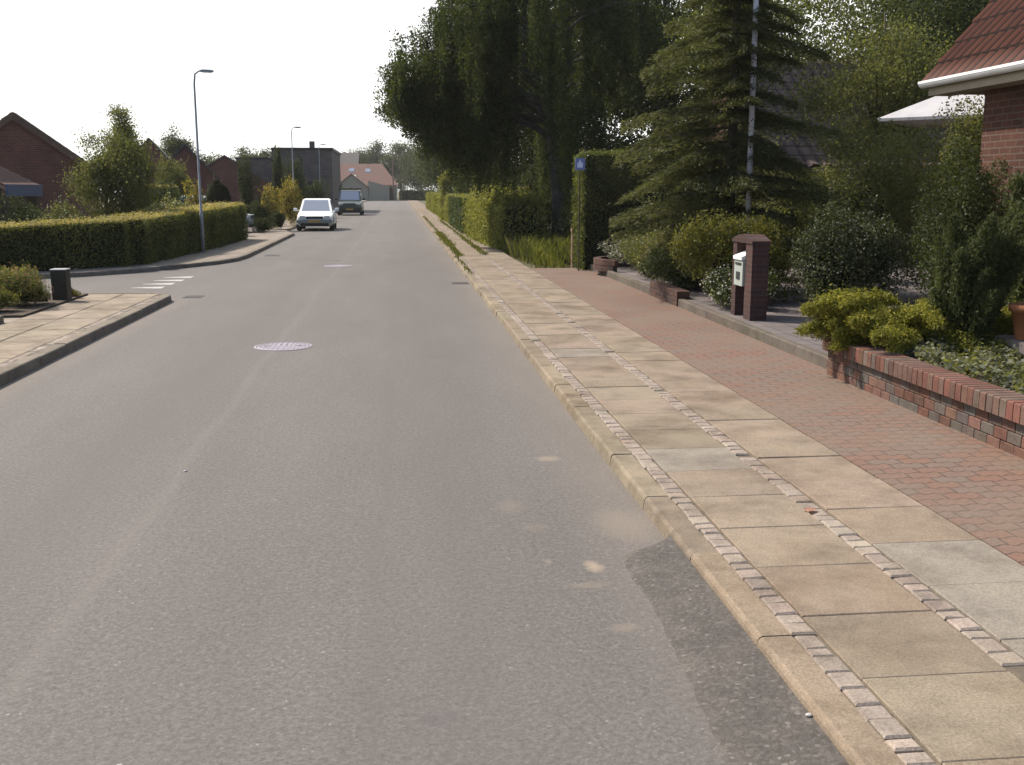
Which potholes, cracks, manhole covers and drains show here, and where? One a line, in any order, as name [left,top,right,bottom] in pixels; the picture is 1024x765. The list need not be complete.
manhole cover [254,342,312,351]
